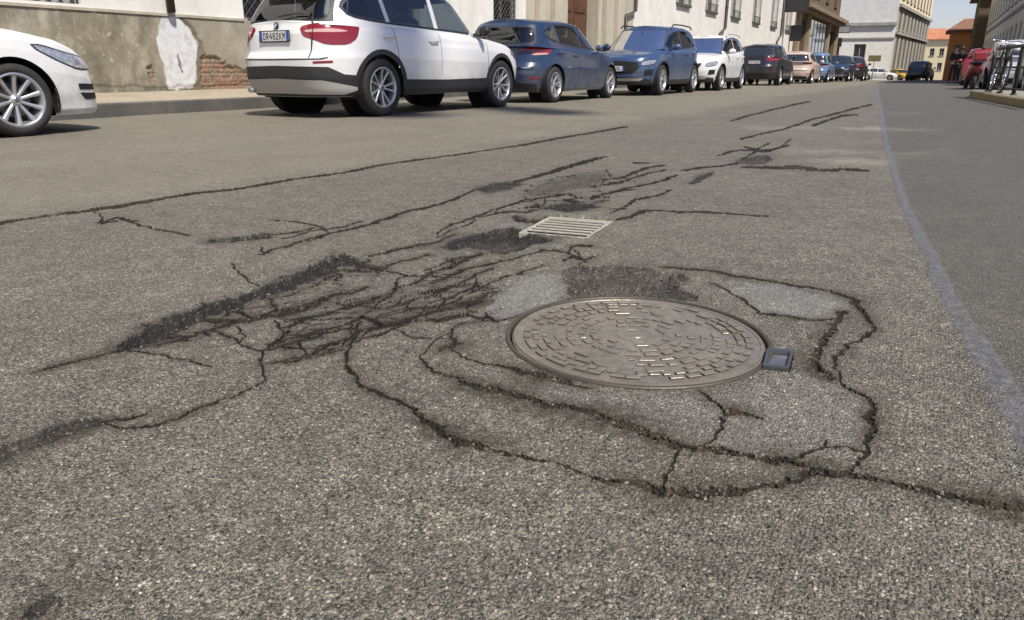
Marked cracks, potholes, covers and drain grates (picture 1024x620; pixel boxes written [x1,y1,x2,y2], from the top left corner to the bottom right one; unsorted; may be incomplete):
crack [32,101,1024,512]
manhole cover [505,296,794,390]
drain grate [519,216,614,238]
